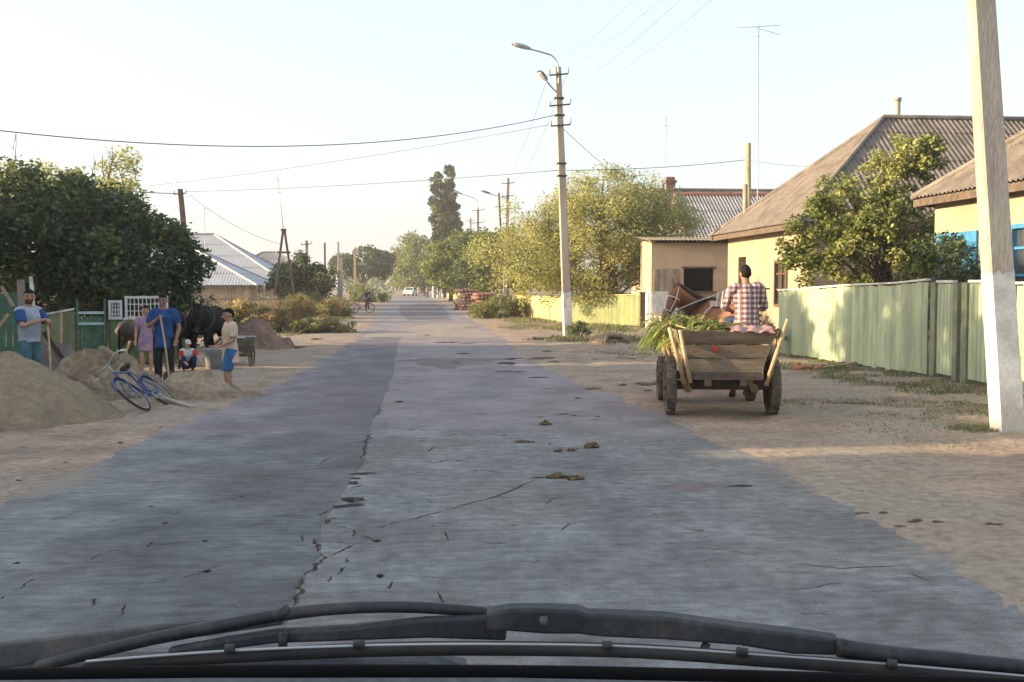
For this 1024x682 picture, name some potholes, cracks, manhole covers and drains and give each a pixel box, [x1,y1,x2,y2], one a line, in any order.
crack [327,411,559,582]
crack [792,564,931,590]
